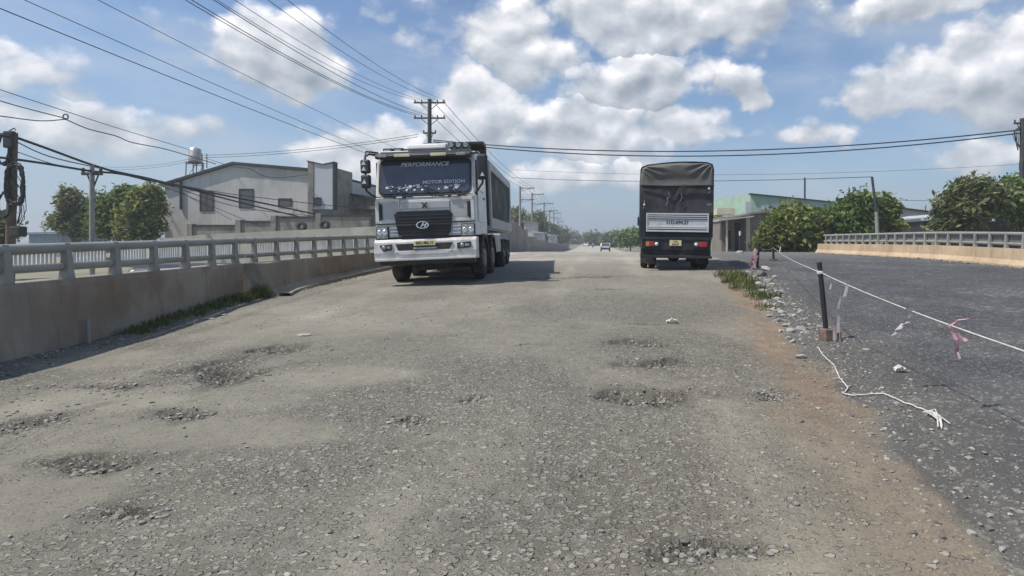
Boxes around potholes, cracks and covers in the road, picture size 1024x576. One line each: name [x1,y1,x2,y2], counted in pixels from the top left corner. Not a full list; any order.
pothole [151,355,279,391]
pothole [0,411,82,435]
pothole [242,345,309,354]
pothole [91,504,167,520]
pothole [608,357,693,368]
pothole [394,414,428,424]
pothole [567,385,735,409]
pothole [748,391,790,401]
pothole [640,538,770,564]
pothole [154,408,210,422]
pothole [39,451,151,476]
pothole [606,338,673,349]
